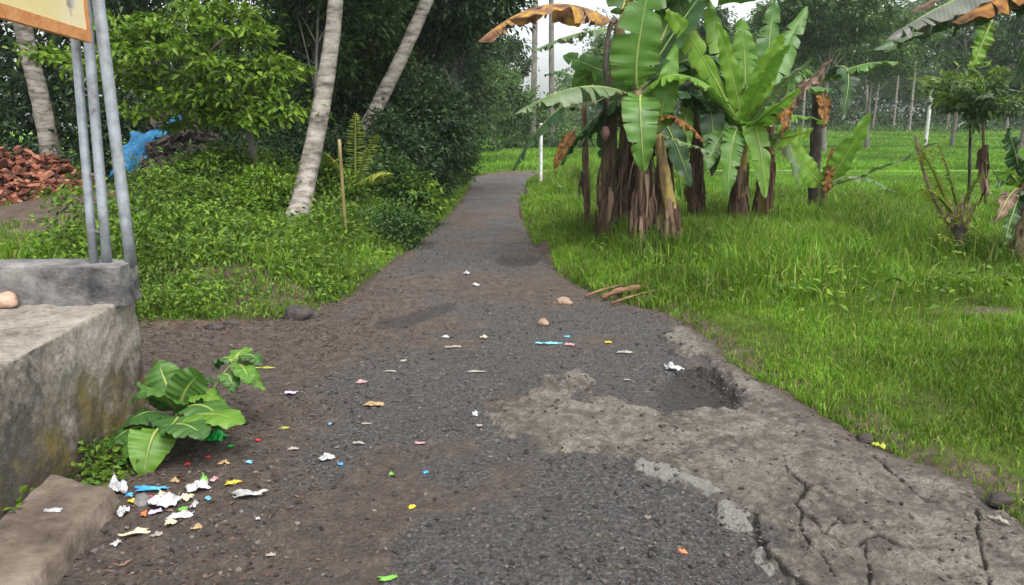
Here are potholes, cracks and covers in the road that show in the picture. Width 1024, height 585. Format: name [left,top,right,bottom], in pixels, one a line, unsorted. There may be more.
pothole [630,361,756,415]
crack [742,449,1008,585]
